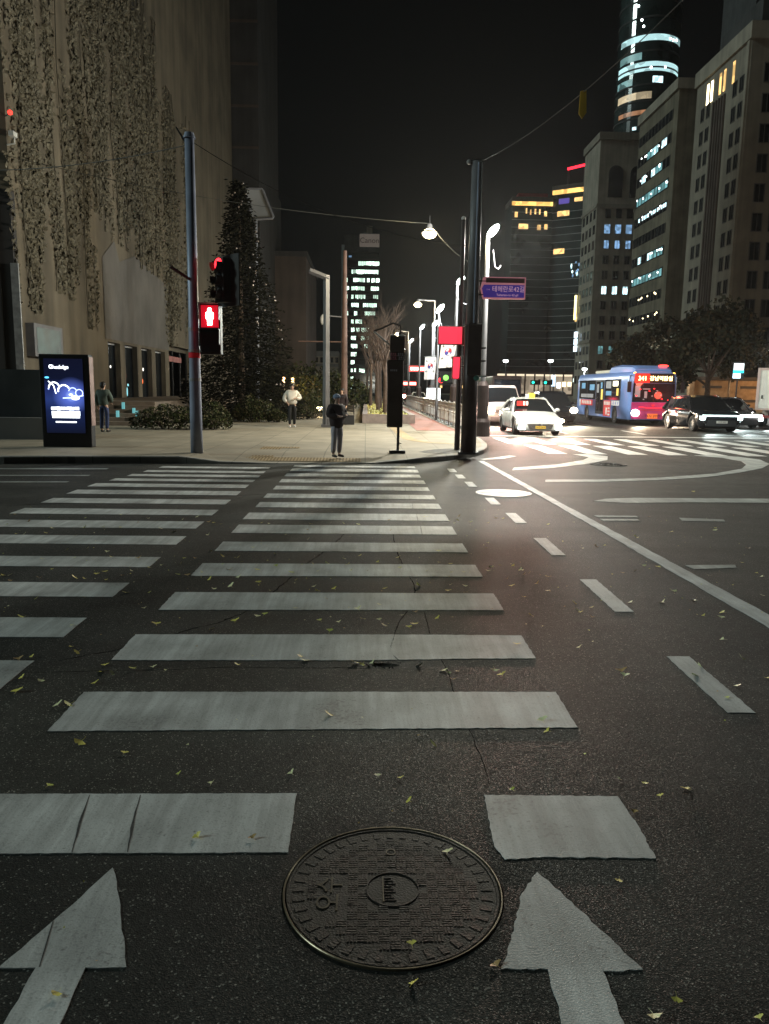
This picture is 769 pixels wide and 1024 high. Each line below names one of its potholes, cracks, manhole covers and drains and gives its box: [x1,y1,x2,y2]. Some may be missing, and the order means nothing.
crack [393,534,490,785]
manhole cover [283,827,503,972]
